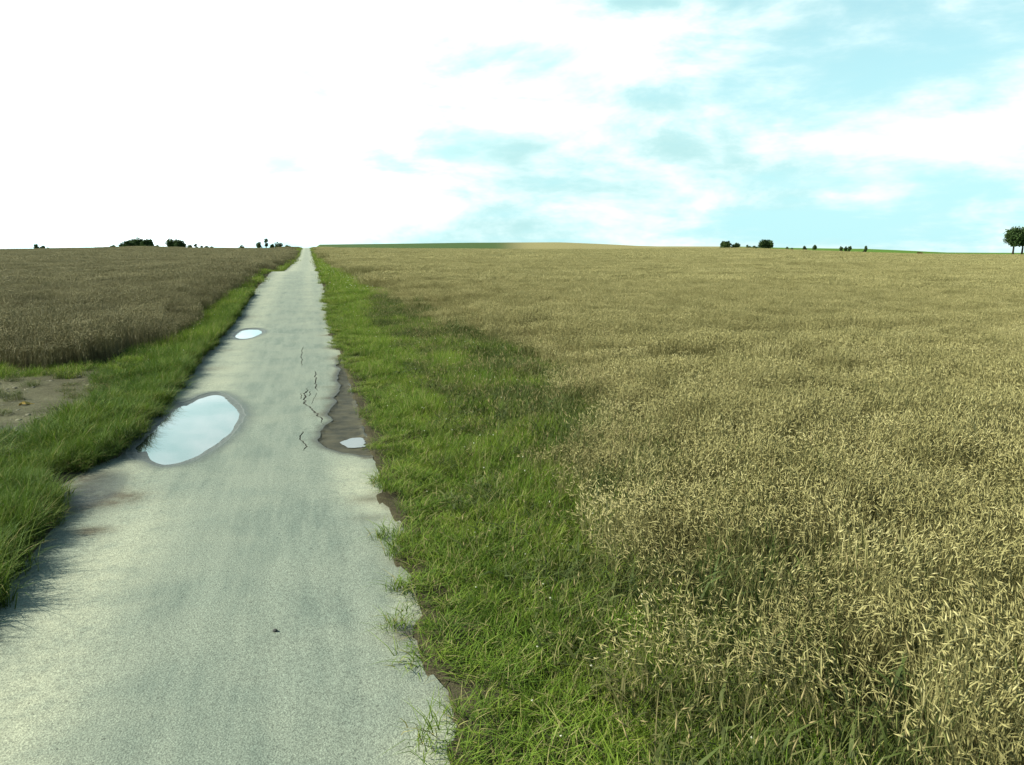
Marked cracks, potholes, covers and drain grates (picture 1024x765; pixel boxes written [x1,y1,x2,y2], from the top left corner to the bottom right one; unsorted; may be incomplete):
pothole [126,392,246,466]
pothole [232,328,265,340]
